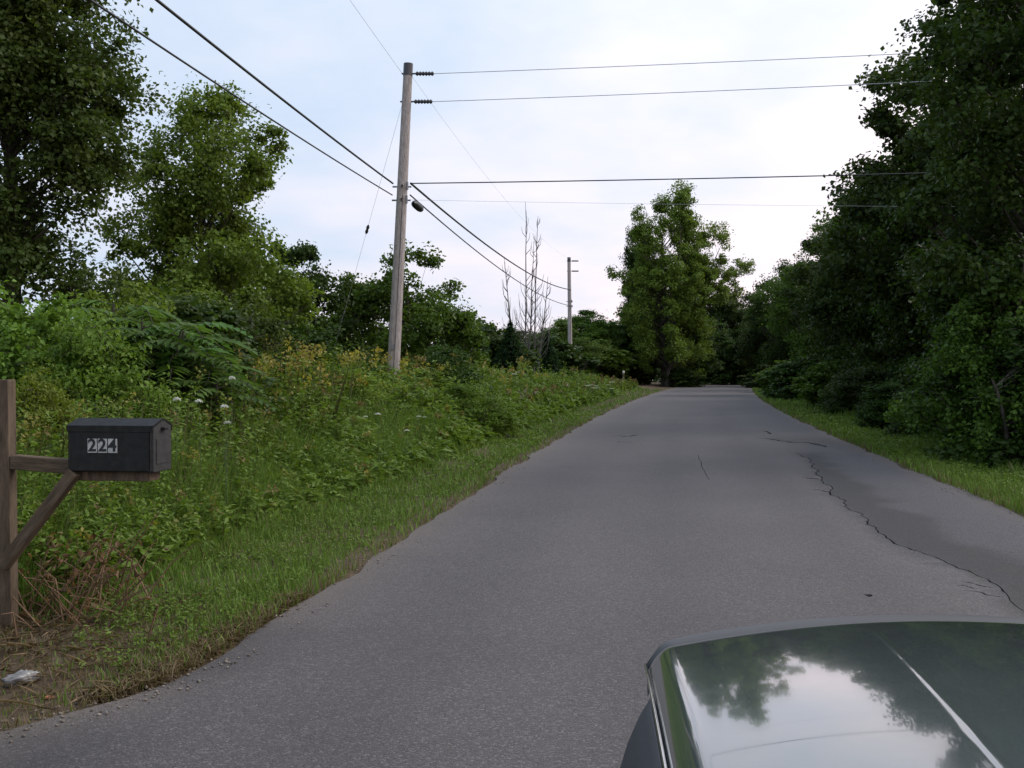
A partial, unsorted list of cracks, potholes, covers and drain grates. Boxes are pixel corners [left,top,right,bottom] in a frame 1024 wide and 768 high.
crack [761,431,1023,611]
